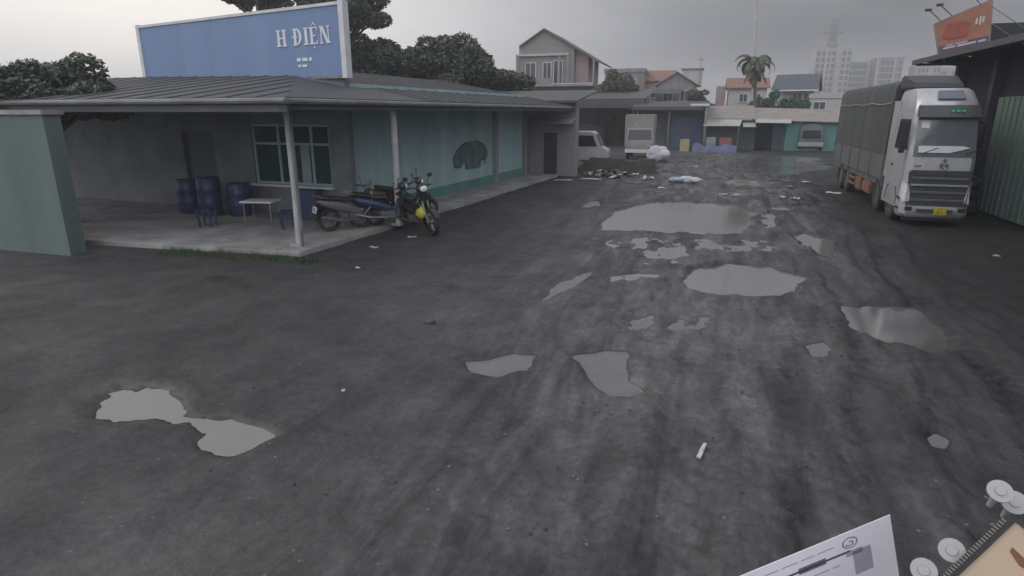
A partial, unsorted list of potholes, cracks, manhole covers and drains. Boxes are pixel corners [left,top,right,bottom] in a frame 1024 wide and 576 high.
pothole [784,229,845,262]
pothole [821,296,979,360]
pothole [437,341,557,381]
pothole [509,264,612,306]
pothole [753,208,792,229]
pothole [552,332,667,404]
pothole [673,259,826,298]
pothole [63,375,296,467]
pothole [590,233,790,268]
pothole [593,198,761,235]
